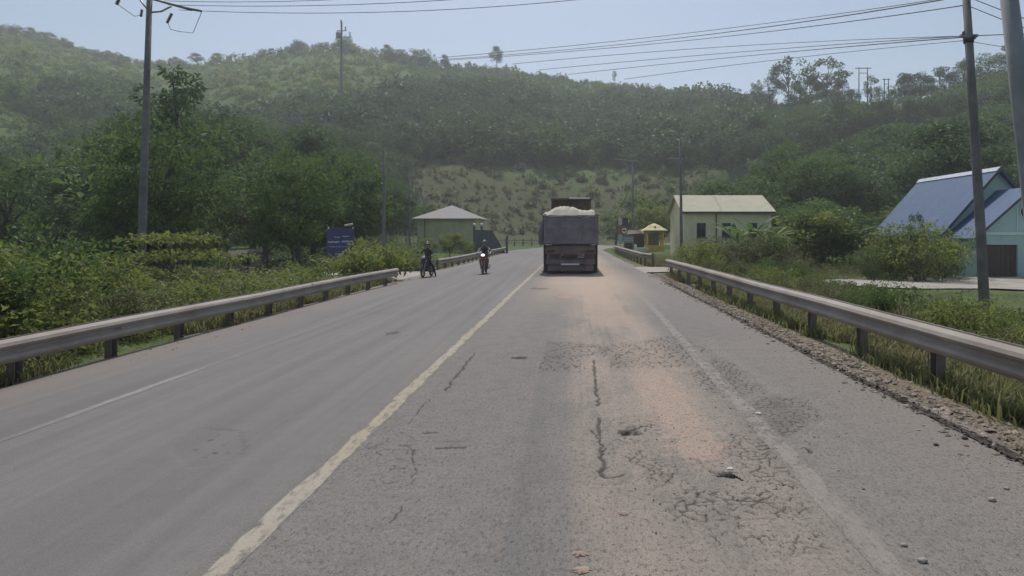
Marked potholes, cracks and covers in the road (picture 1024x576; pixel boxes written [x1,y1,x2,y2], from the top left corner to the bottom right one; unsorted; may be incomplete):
pothole [502,353,536,362]
crack [350,349,481,529]
crack [534,335,868,560]
